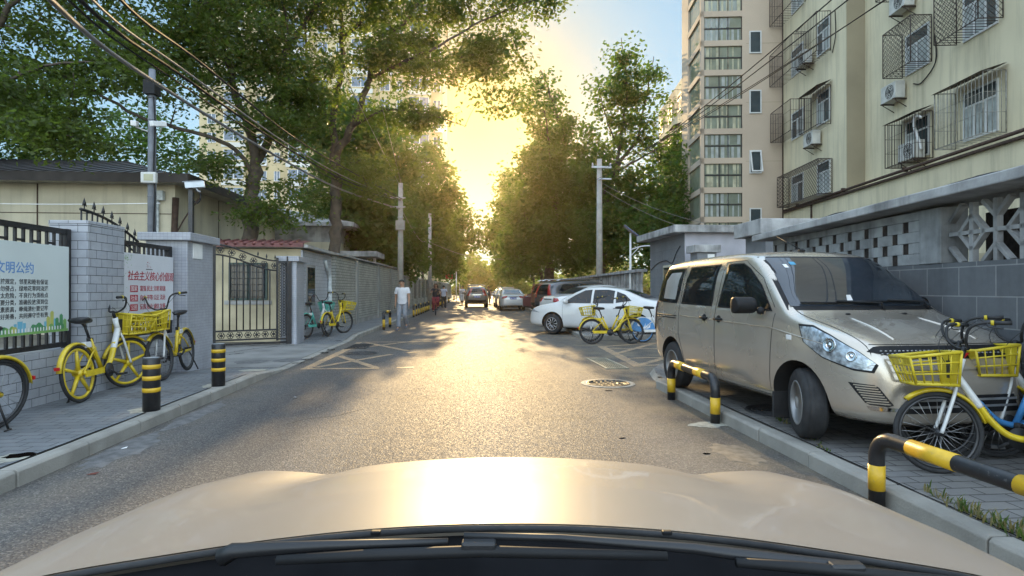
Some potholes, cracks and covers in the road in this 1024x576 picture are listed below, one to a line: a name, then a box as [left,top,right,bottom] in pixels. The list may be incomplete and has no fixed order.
manhole cover [744,404,790,418]
manhole cover [581,379,635,388]
